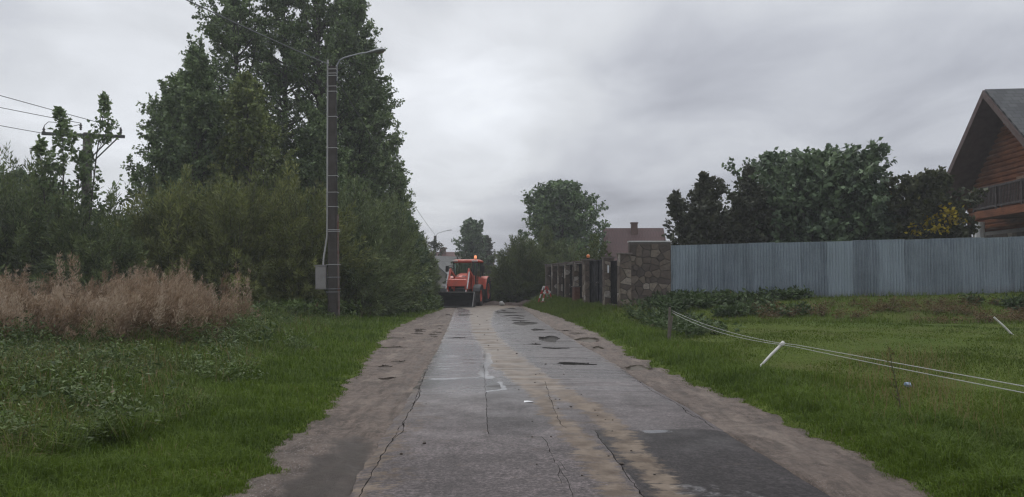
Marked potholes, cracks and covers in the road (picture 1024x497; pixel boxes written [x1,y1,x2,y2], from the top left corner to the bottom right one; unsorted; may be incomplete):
crack [359,369,428,497]
crack [483,367,712,497]
